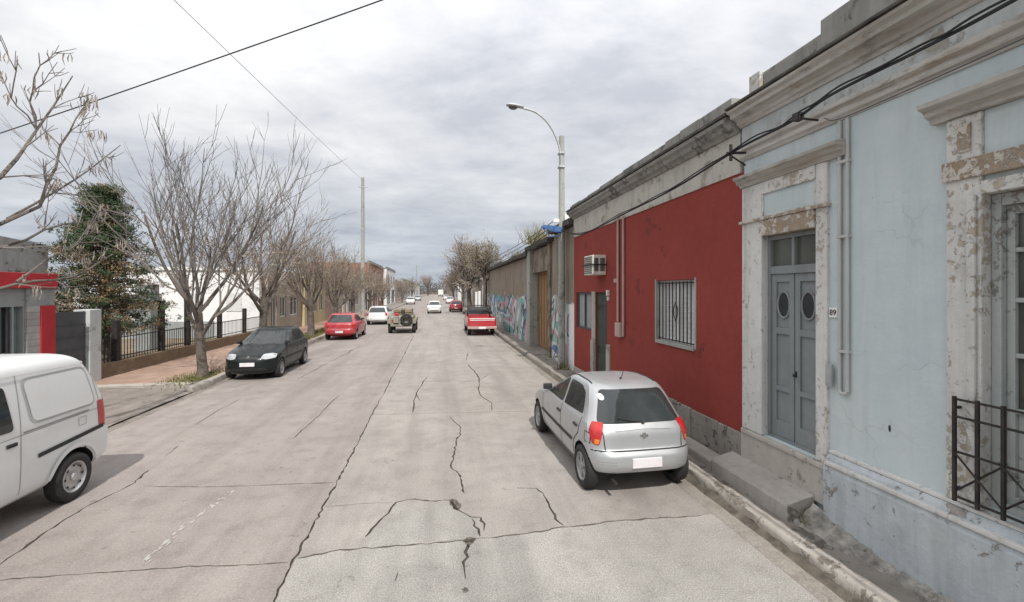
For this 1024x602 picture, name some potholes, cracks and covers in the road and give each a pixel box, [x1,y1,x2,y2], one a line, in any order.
crack [0,353,702,581]
